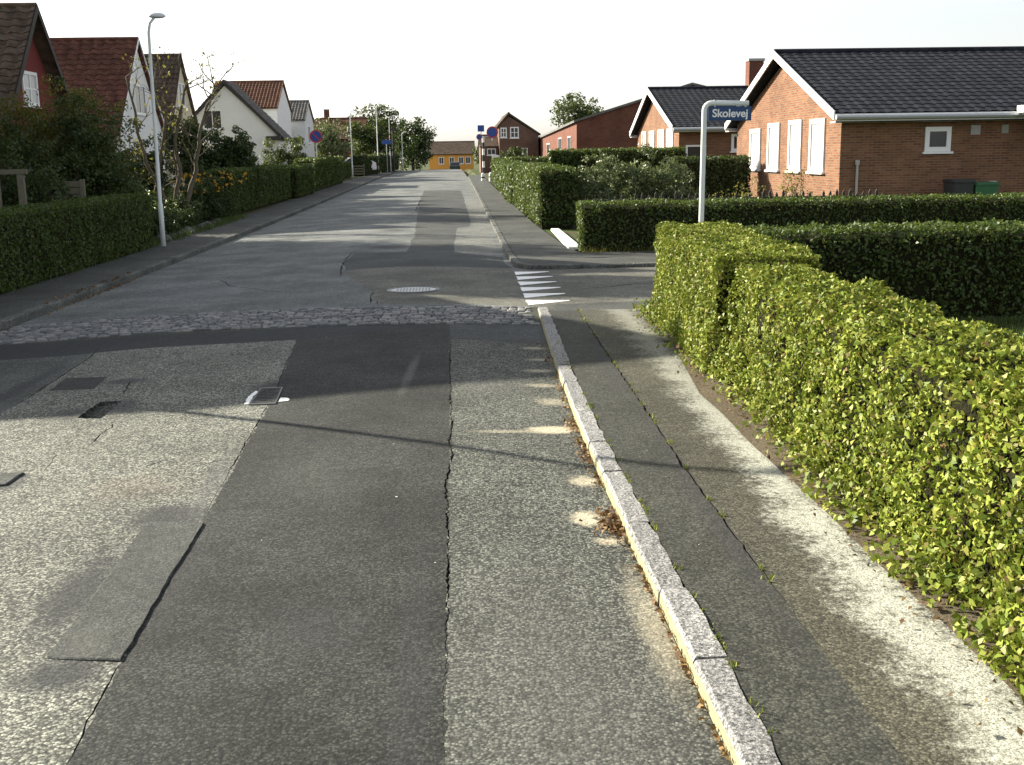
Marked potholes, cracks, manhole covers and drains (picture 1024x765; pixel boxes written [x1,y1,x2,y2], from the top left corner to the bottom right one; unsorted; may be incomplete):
pothole [78,401,121,419]
